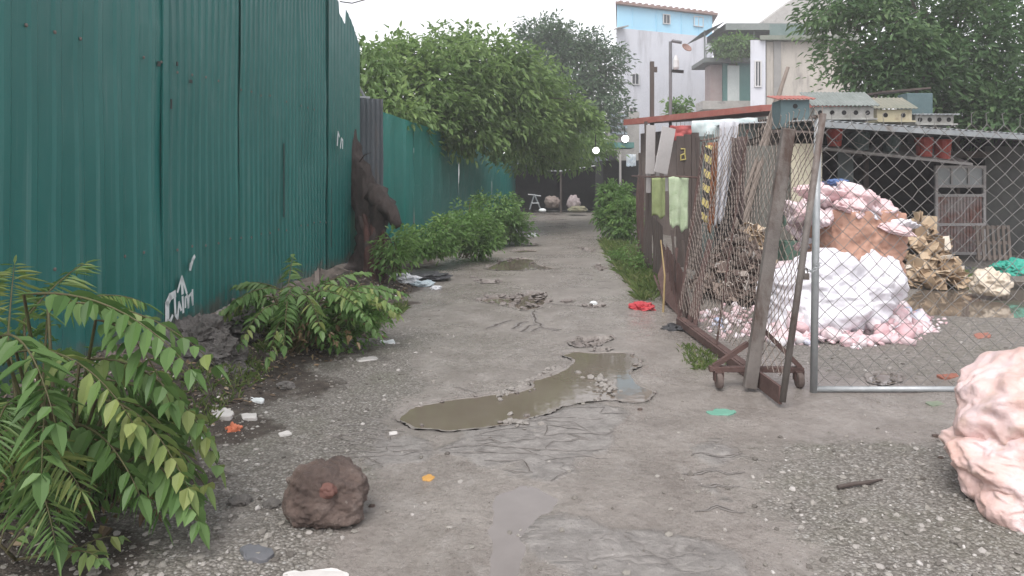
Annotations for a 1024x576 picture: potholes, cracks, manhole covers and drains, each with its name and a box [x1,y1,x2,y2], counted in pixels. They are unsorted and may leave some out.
crack [486,303,577,332]
pothole [473,290,554,311]
pothole [396,351,658,432]
crack [682,452,746,513]
pothole [483,257,559,271]
pothole [567,334,616,348]
crack [443,406,624,480]
